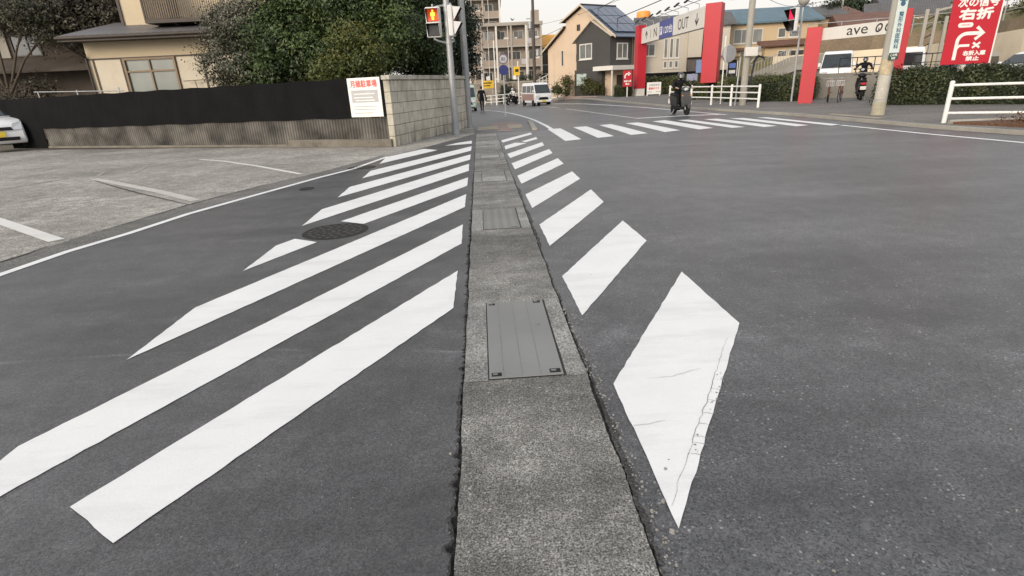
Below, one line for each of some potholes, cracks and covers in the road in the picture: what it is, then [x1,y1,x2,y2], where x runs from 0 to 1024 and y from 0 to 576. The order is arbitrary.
crack [655,339,728,504]
manhole cover [302,223,368,240]
